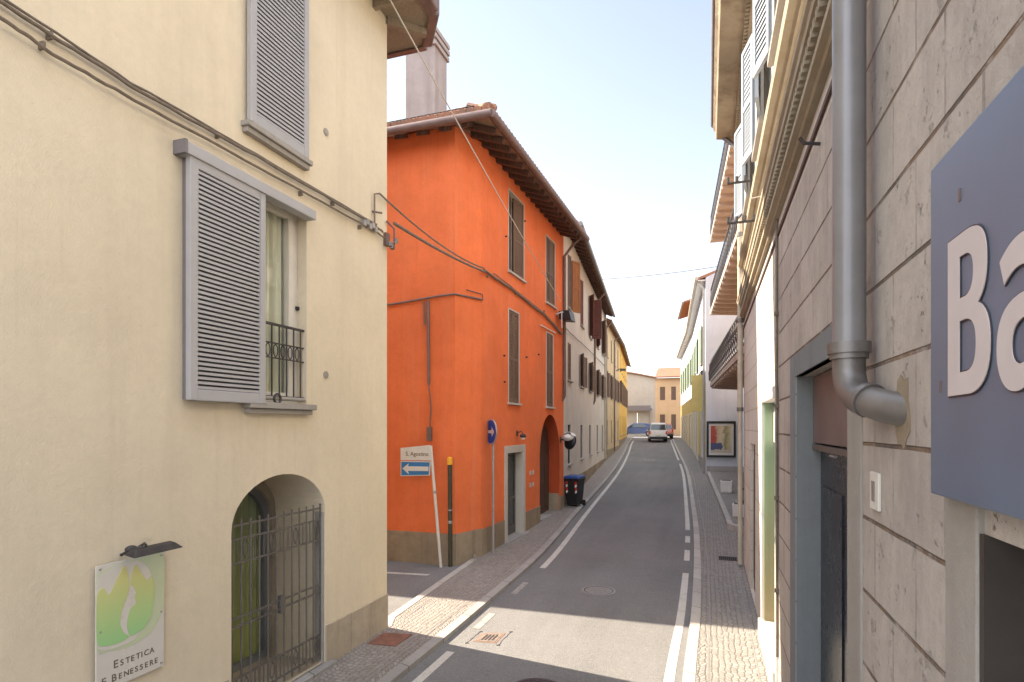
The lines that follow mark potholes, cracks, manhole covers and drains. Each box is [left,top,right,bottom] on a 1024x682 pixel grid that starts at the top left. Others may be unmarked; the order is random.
manhole cover [582,586,616,595]
manhole cover [367,633,412,647]
